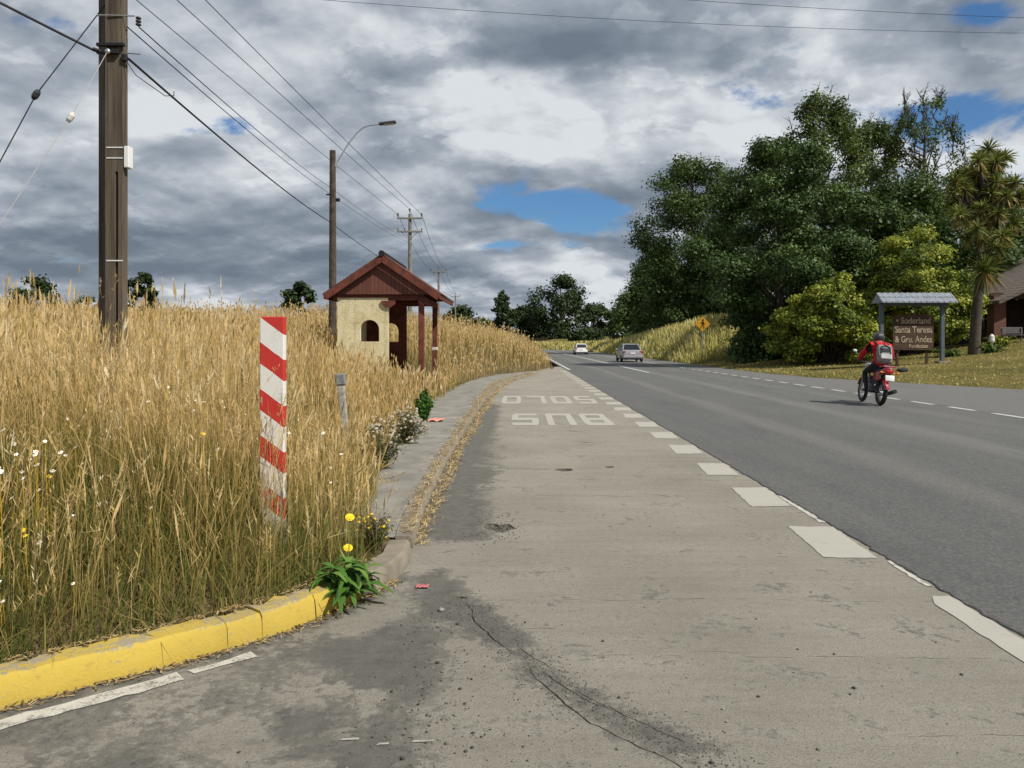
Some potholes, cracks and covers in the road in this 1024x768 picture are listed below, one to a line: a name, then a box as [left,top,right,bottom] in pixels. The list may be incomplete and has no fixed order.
pothole [484,523,516,533]
crack [468,598,876,768]
